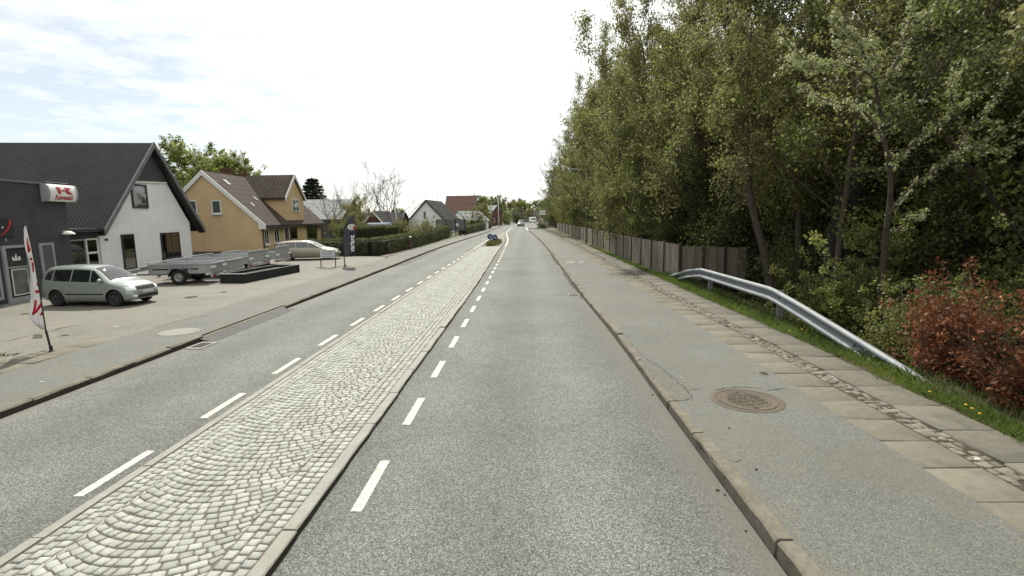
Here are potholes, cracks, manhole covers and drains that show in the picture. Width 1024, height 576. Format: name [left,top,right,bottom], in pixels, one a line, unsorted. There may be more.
manhole cover [710,389,786,413]
manhole cover [157,328,200,336]
